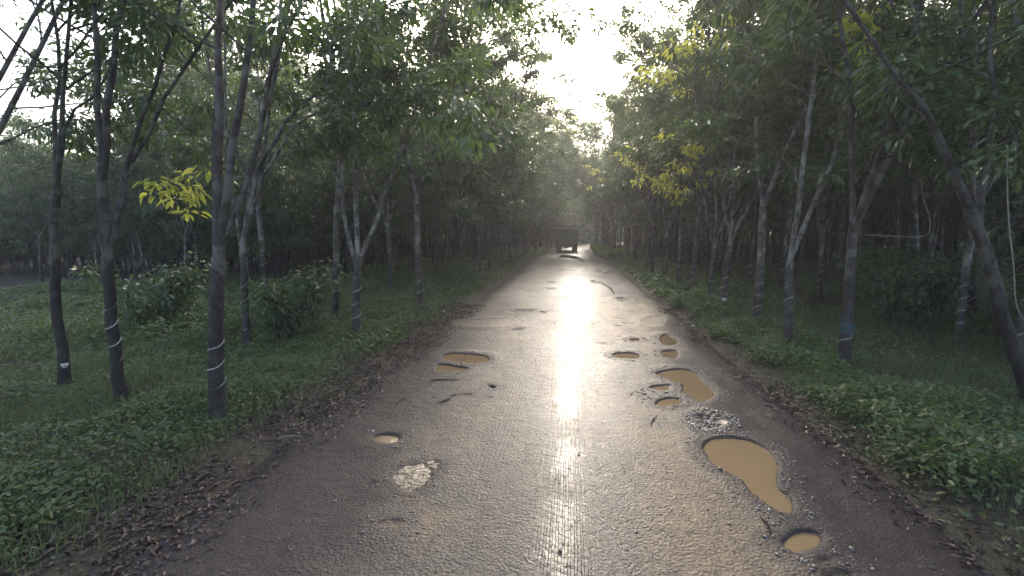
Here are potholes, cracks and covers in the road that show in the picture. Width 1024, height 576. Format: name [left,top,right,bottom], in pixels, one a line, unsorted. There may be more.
pothole [656,348,684,360]
pothole [556,254,587,262]
pothole [690,432,810,521]
pothole [775,523,836,560]
pothole [654,333,684,346]
pothole [434,351,496,365]
pothole [690,411,734,431]
pothole [606,350,647,360]
pothole [374,430,407,446]
pothole [429,361,476,373]
pothole [647,366,725,405]
crack [429,379,493,402]
